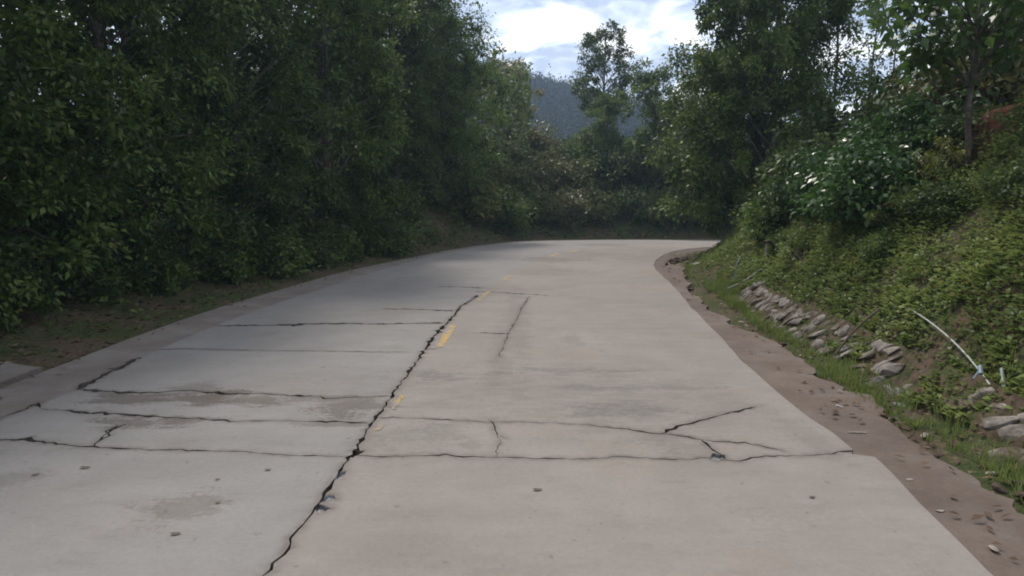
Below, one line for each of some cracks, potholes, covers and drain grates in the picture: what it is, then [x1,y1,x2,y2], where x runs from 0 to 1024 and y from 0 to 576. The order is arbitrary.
crack [575,407,782,457]
crack [3,286,575,576]
